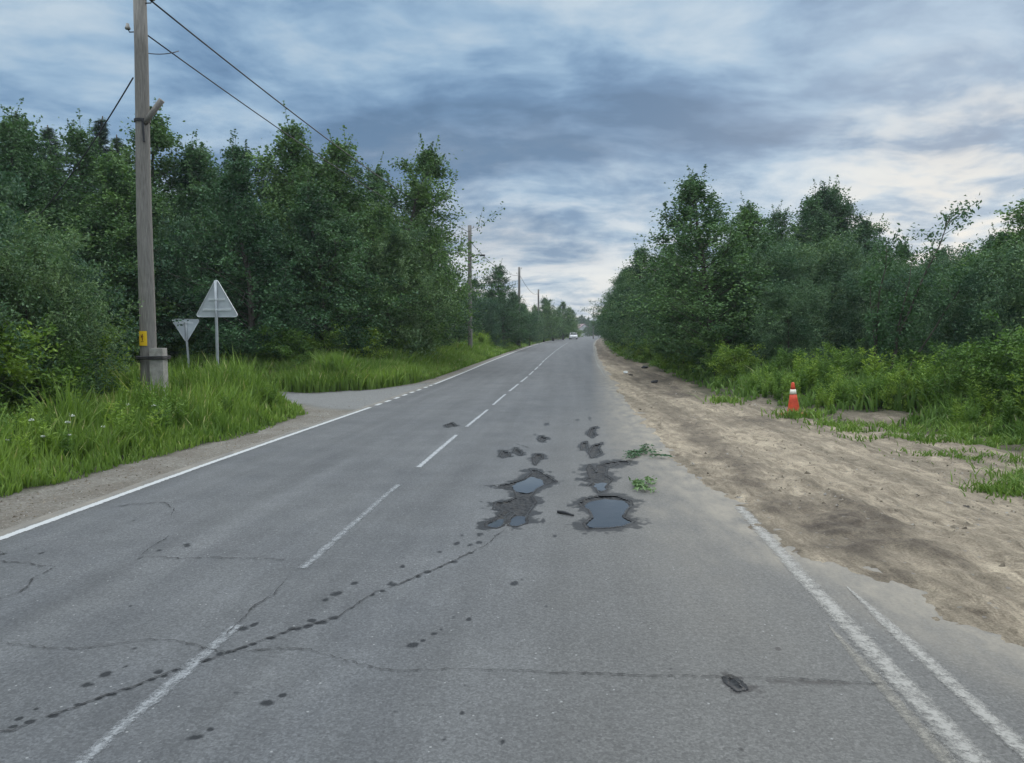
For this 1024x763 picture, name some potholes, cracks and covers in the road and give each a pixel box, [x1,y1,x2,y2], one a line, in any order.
pothole [722,674,749,692]
pothole [578,494,636,529]
pothole [484,469,558,529]
pothole [588,442,603,458]
pothole [582,460,630,493]
crack [0,530,890,731]
